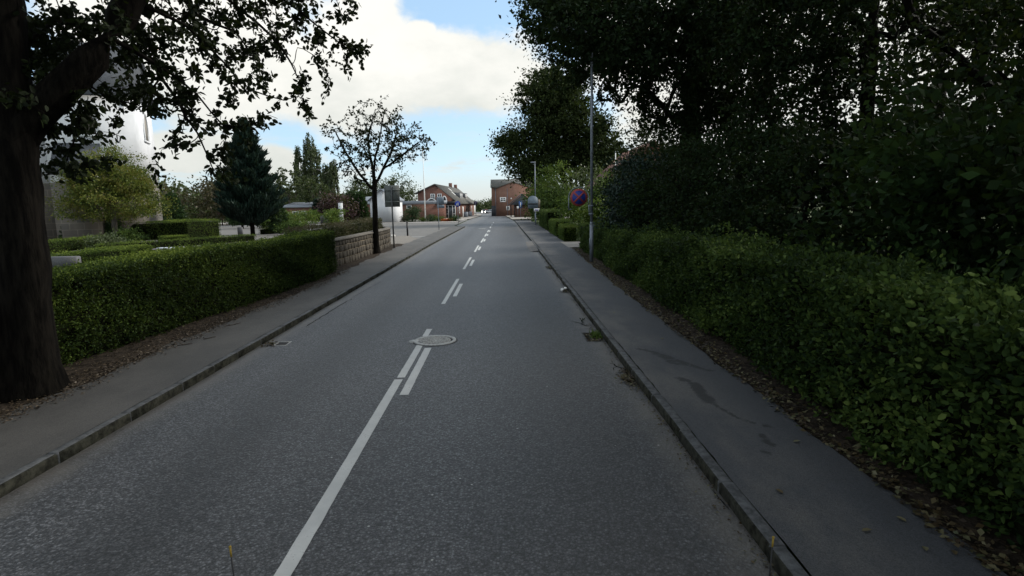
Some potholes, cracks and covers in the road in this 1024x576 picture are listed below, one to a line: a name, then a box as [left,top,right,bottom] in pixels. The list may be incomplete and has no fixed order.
manhole cover [409,335,458,346]
